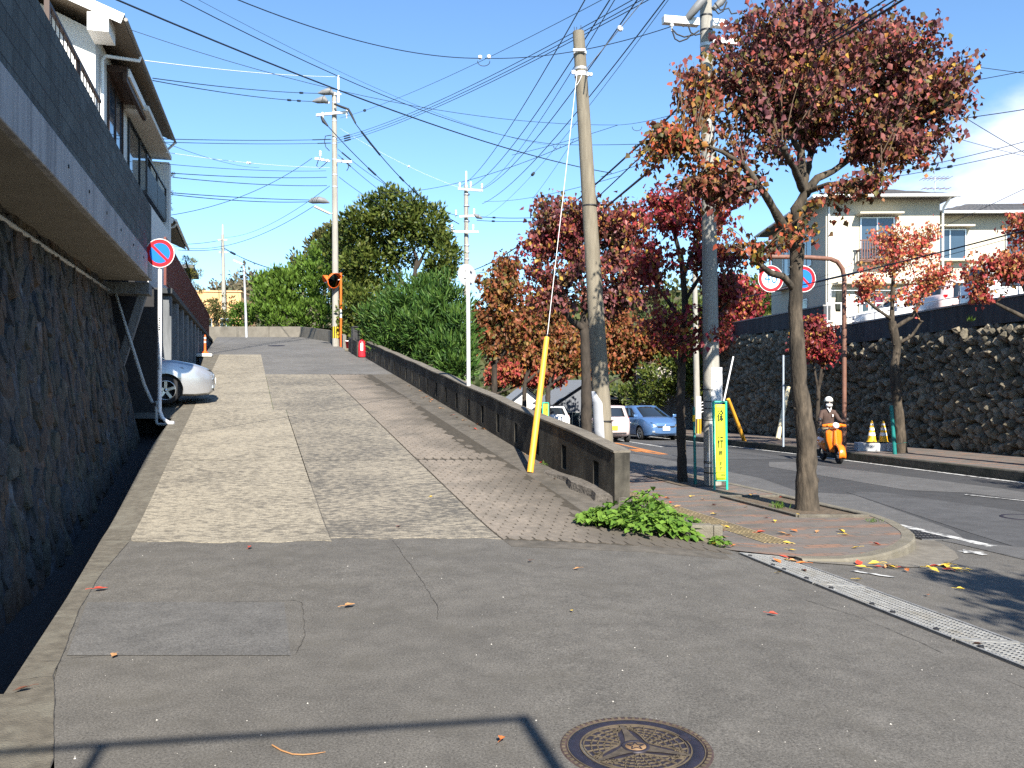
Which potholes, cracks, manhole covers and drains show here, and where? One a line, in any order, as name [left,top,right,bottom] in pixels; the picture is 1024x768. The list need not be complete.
drain grate [739,552,865,586]
drain grate [813,583,1019,642]
drain grate [952,638,1024,669]
manhole cover [560,717,714,768]
drain grate [910,530,957,541]
